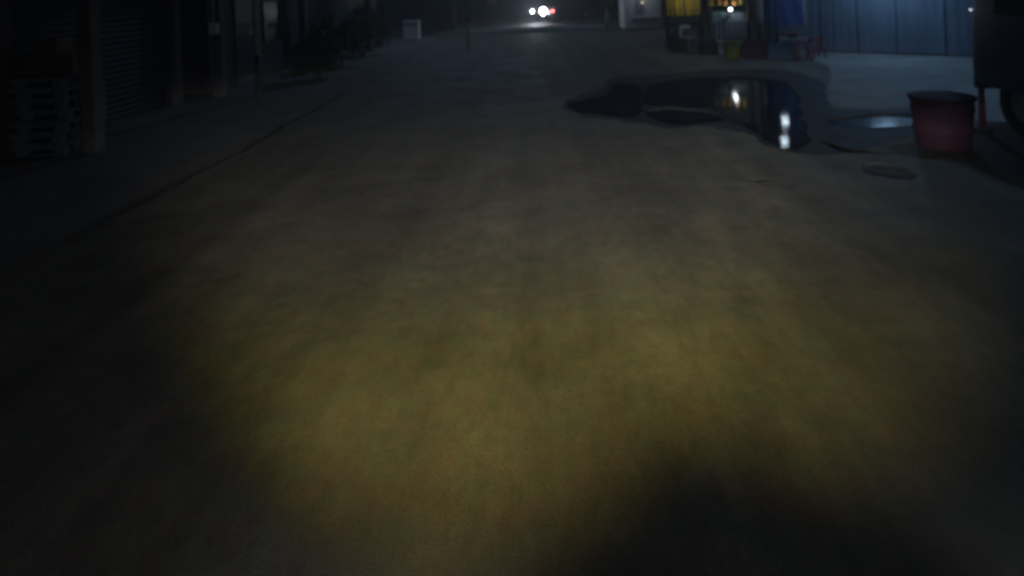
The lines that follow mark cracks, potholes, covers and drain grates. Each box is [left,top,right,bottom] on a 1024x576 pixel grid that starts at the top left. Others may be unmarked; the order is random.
pothole [643,107,725,125]
pothole [566,82,645,117]
crack [116,93,345,215]
pothole [709,76,812,150]
pothole [640,76,722,108]
